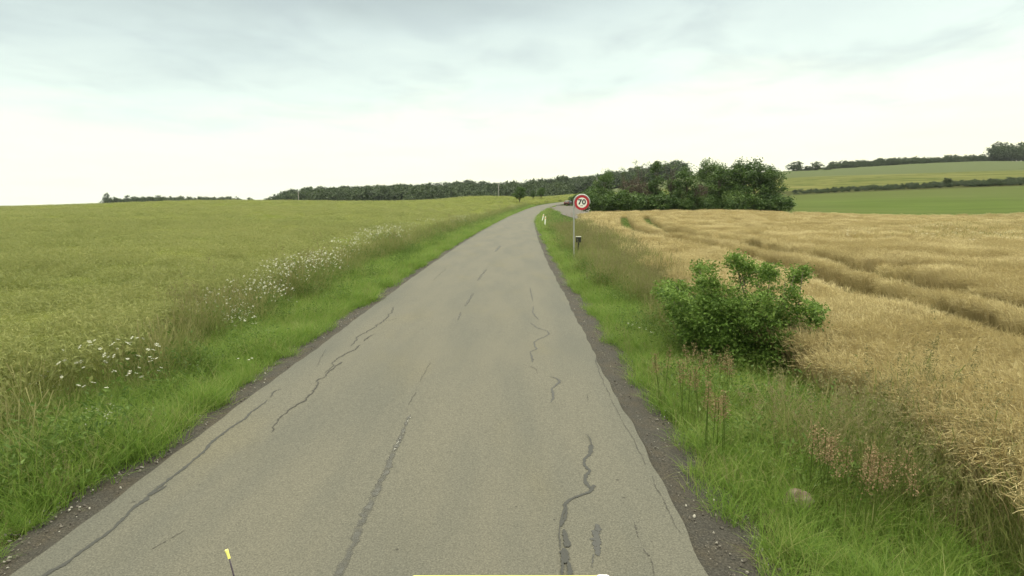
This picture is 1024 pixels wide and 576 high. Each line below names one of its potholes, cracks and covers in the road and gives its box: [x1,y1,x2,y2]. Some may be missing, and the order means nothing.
crack [272,308,397,431]
